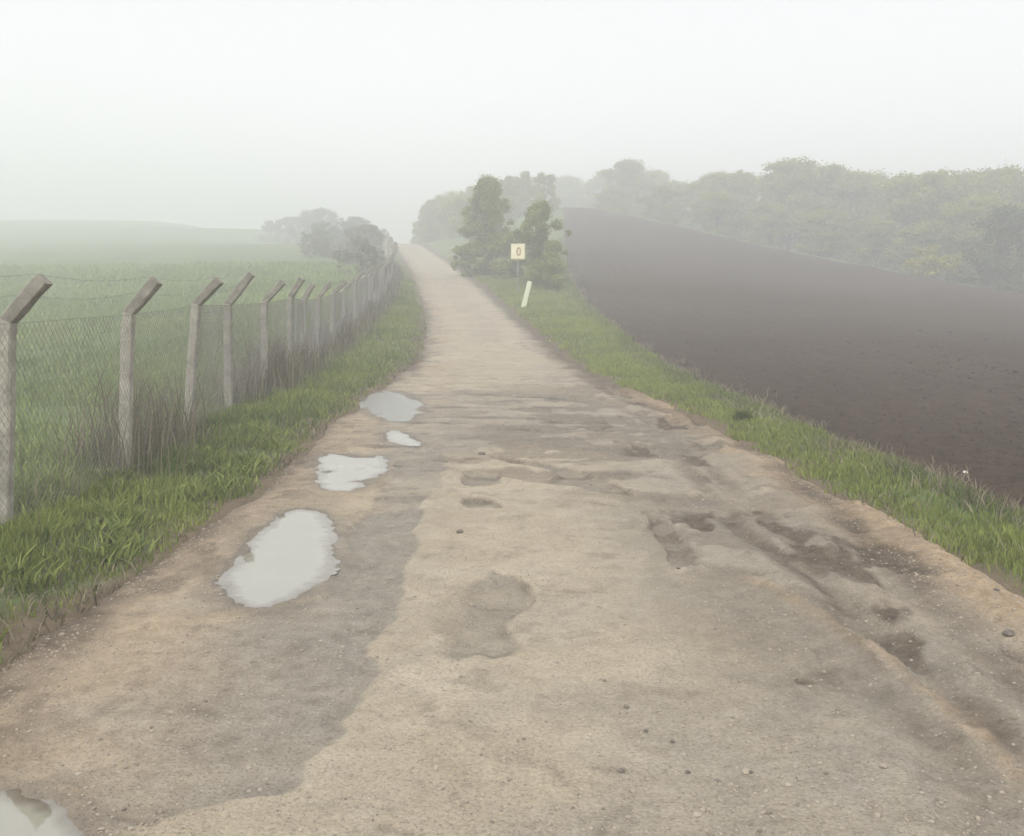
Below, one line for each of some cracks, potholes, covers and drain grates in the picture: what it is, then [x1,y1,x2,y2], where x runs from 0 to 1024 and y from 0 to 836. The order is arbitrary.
pothole [490,456,635,497]
pothole [359,391,427,421]
pothole [310,452,391,491]
pothole [459,496,504,508]
pothole [0,784,103,836]
pothole [432,567,536,661]
pothole [459,470,503,487]
pothole [210,508,342,608]
pothole [384,430,422,447]
pothole [641,510,703,567]
